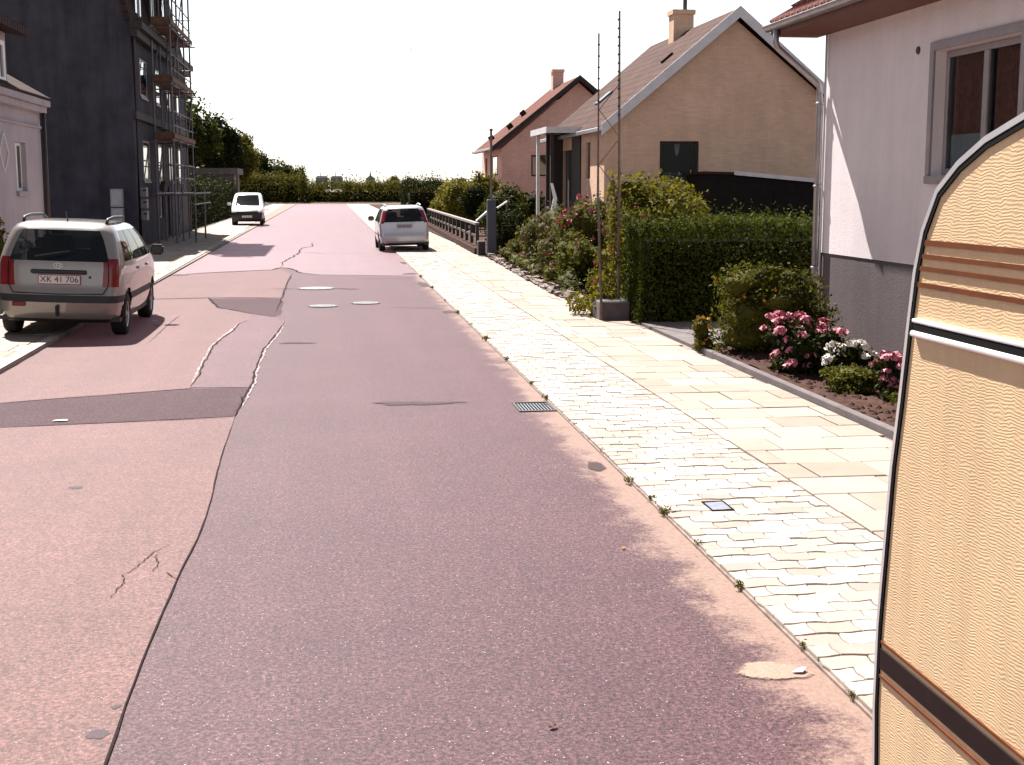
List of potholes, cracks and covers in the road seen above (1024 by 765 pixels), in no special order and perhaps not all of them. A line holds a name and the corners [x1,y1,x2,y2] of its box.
crack [110,543,177,598]
crack [150,244,336,416]
utility cover [701,500,734,511]
drain grate [512,401,557,412]
